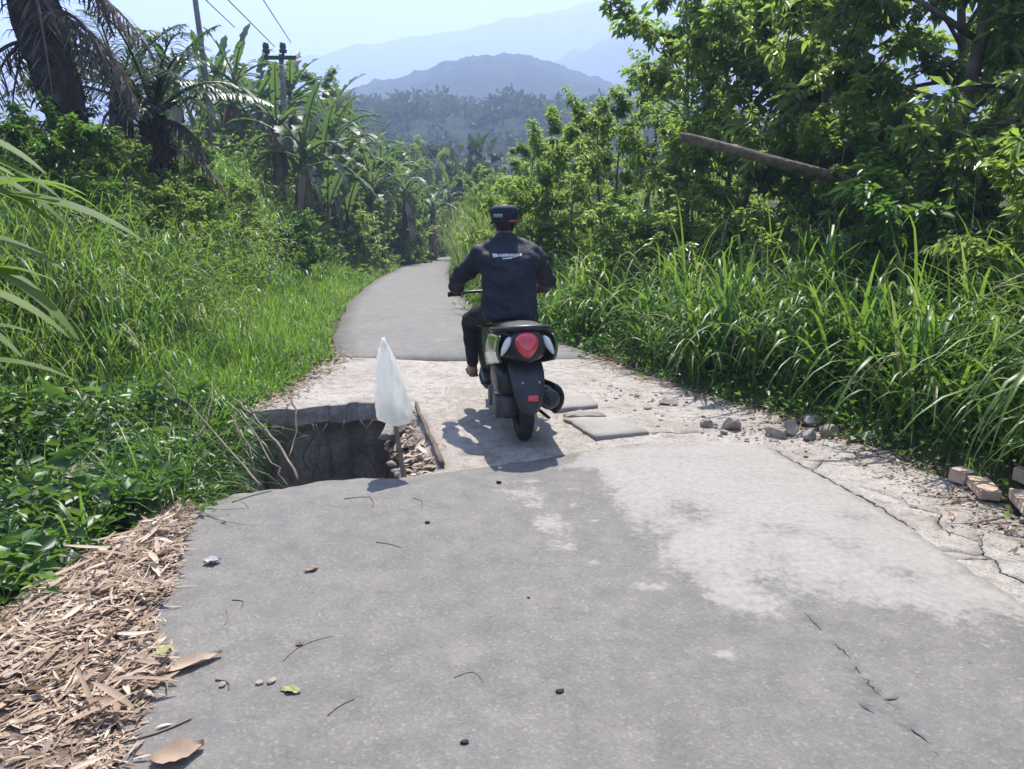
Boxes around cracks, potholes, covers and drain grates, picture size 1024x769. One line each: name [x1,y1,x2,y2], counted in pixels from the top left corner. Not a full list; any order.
crack [810,619,924,740]
pothole [213,403,439,496]
crack [879,492,1024,584]
